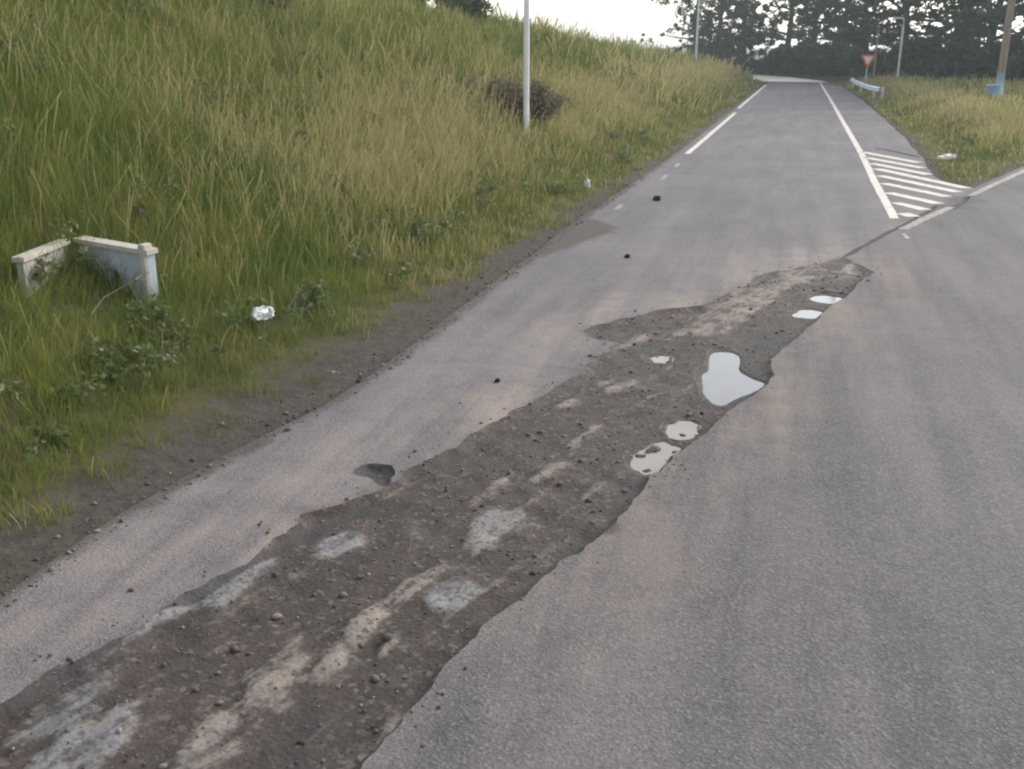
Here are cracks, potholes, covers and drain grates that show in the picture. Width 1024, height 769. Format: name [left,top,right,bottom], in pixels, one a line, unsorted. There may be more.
pothole [693,347,770,407]
pothole [659,417,712,441]
pothole [622,438,687,477]
pothole [640,351,681,364]
pothole [806,291,848,304]
pothole [786,305,828,320]
pothole [352,463,395,487]
